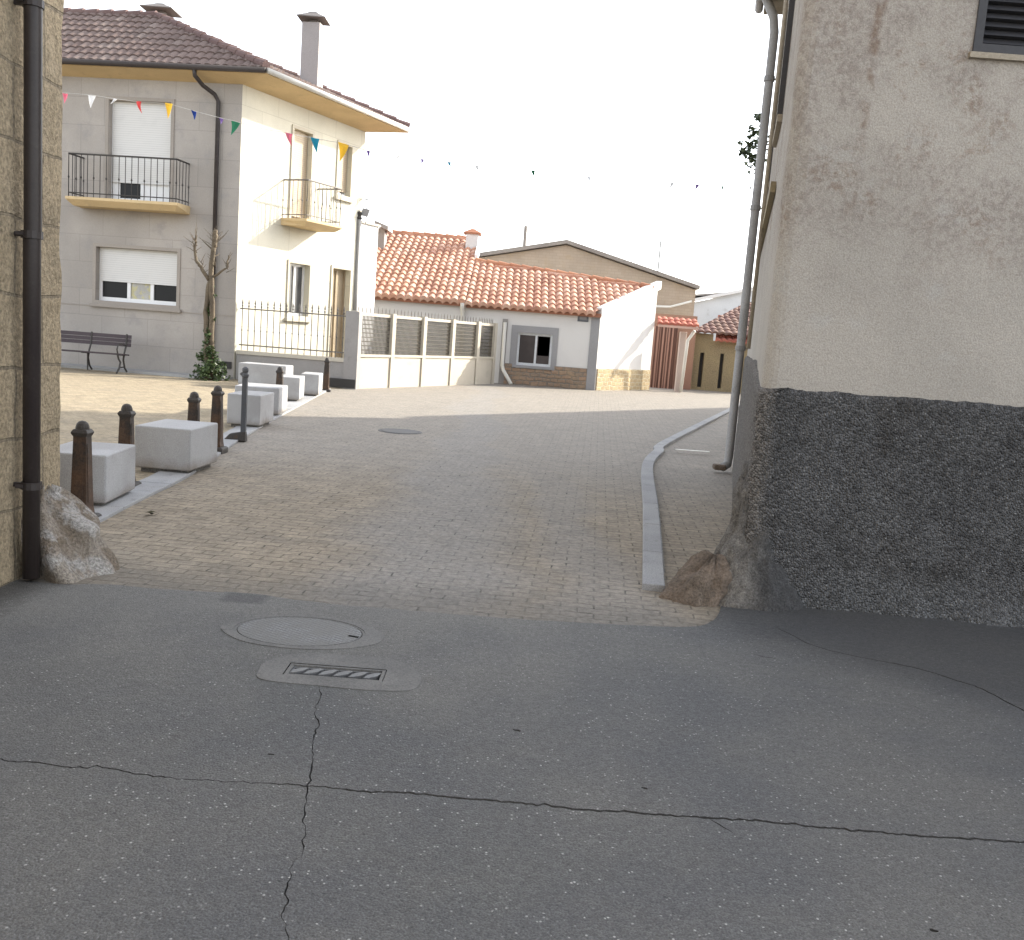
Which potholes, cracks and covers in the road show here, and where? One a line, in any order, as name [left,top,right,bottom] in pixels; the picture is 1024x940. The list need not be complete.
drain grate [257,653,421,692]
crack [776,627,1024,711]
crack [0,686,1024,940]
manhole cover [221,615,384,650]
